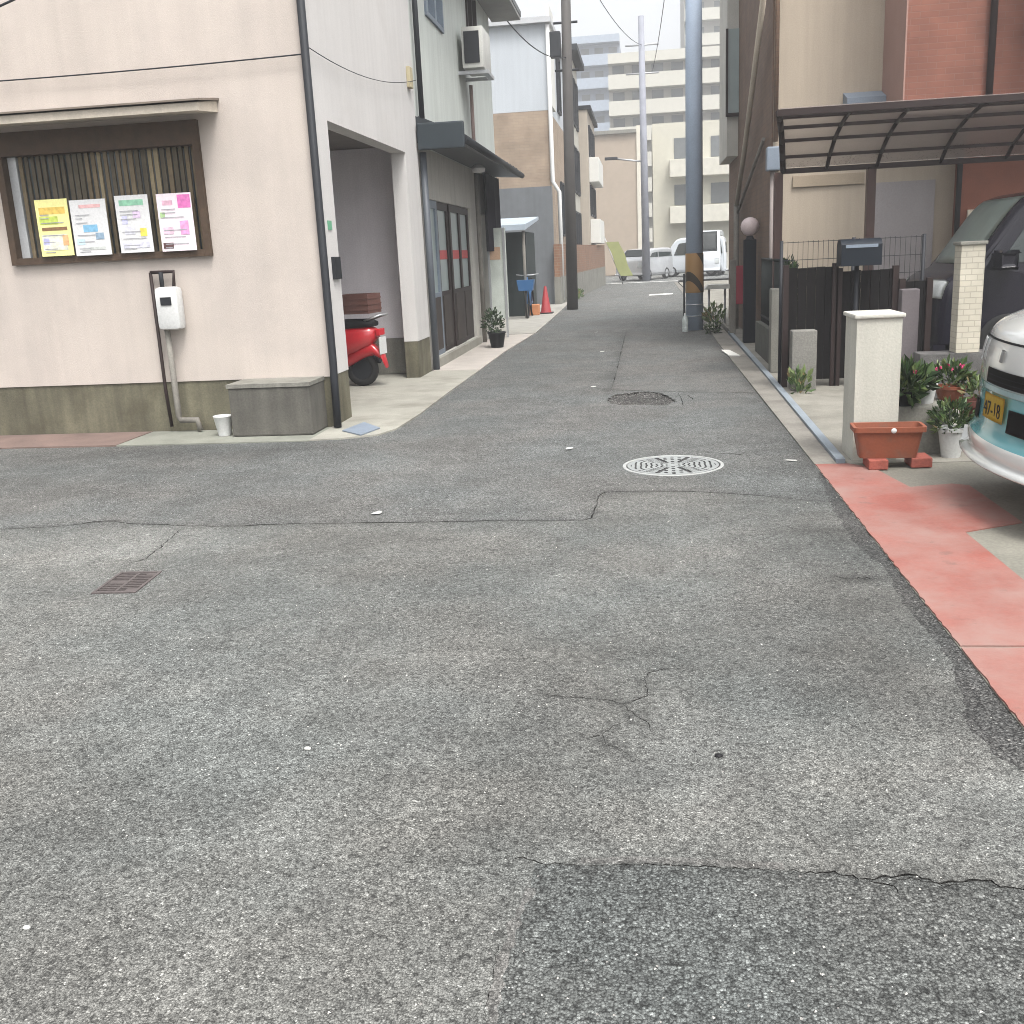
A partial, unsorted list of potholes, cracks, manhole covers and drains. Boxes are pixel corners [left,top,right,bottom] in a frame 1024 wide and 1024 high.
crack [547,668,674,758]
manhole cover [623,455,724,476]
crack [14,491,840,565]
crack [514,857,1024,892]
drain grate [91,571,162,594]
pothole [608,392,676,406]
